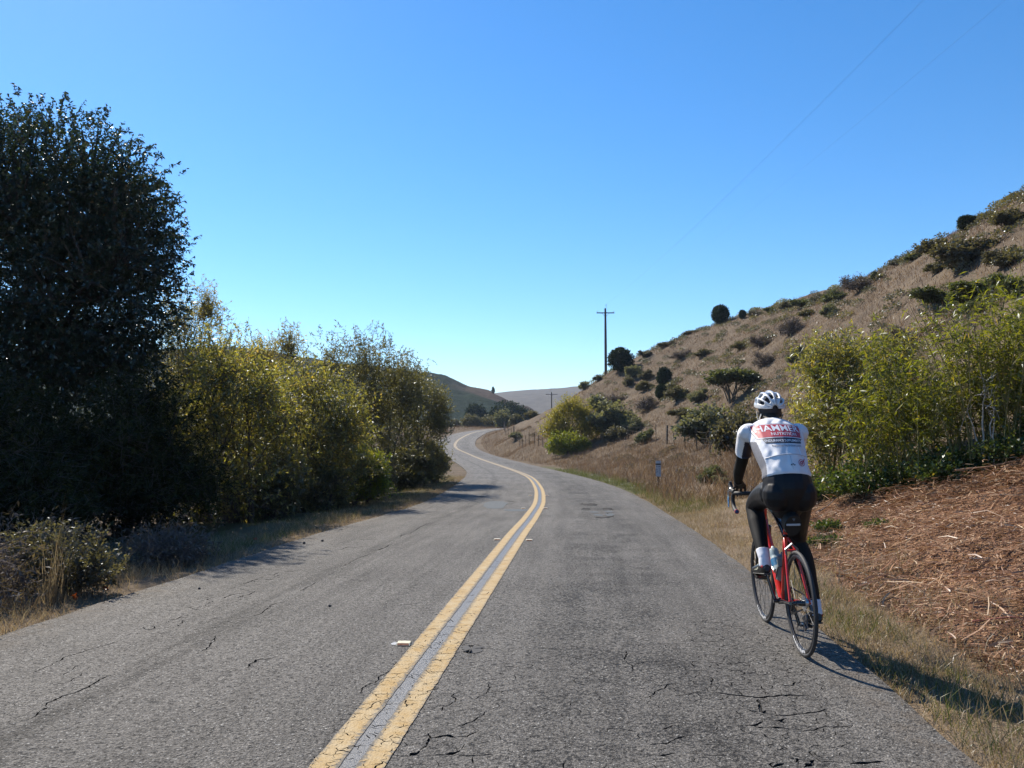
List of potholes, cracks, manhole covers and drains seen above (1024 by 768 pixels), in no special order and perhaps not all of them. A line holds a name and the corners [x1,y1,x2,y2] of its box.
crack [555,615,884,768]
crack [30,639,123,719]
